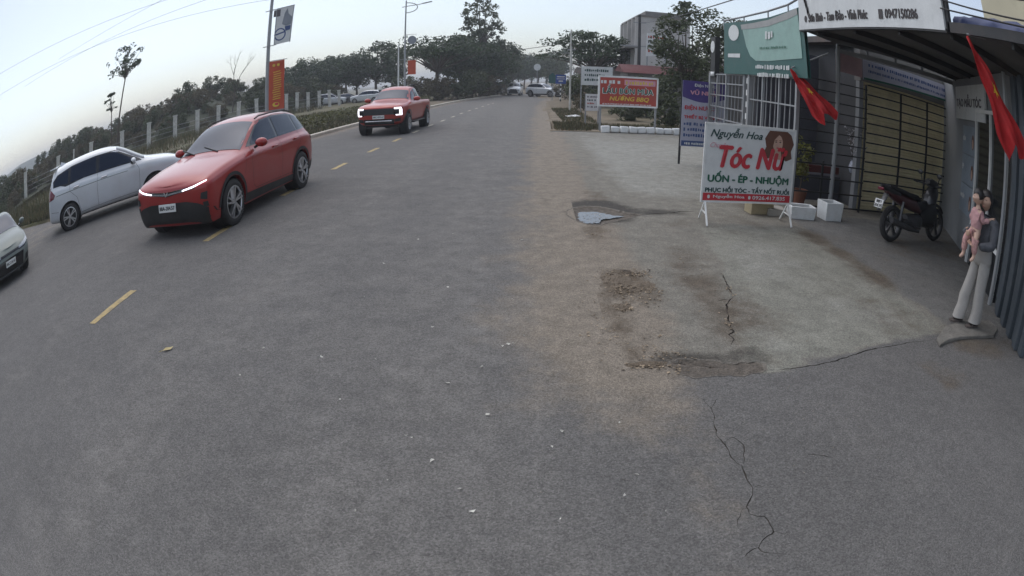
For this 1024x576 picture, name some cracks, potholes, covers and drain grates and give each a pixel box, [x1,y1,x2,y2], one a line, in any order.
crack [782,341,922,370]
pothole [666,358,768,379]
crack [718,272,735,345]
pothole [564,206,642,225]
crack [703,399,797,566]
